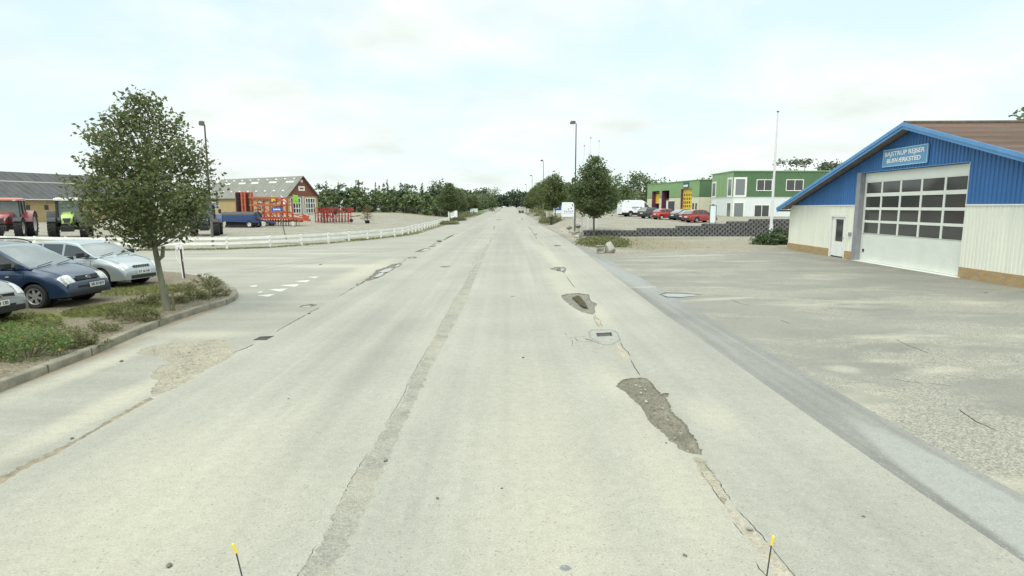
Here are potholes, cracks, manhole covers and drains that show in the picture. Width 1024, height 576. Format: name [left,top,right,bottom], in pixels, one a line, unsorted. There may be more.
pothole [365,263,402,281]
pothole [561,293,597,315]
pothole [616,377,702,455]
crack [693,457,795,576]
crack [571,315,640,375]
